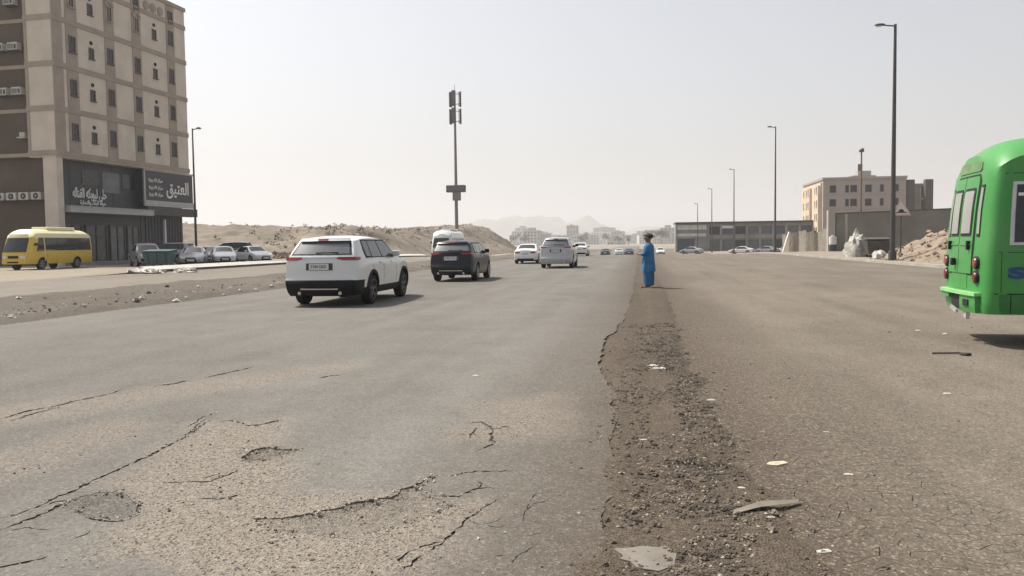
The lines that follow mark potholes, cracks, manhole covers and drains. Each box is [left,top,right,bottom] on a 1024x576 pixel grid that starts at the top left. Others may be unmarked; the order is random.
pothole [60,491,137,519]
crack [153,368,248,387]
pothole [241,447,299,463]
crack [162,469,244,500]
crack [2,412,218,540]
crack [1,389,122,421]
crack [465,422,507,451]
